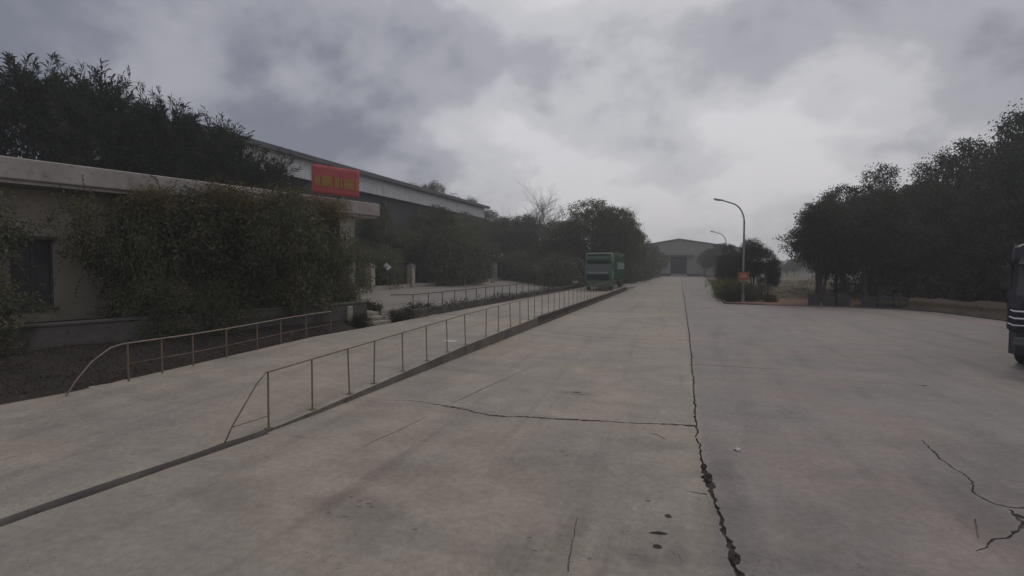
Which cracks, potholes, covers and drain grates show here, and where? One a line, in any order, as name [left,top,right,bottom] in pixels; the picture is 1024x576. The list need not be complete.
crack [362,280,745,576]
crack [922,440,1024,551]
